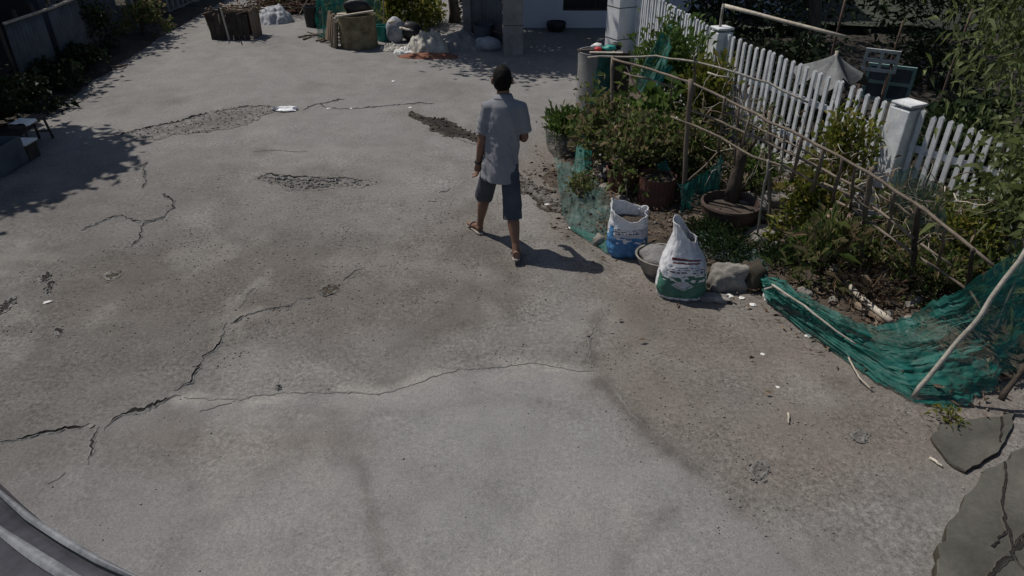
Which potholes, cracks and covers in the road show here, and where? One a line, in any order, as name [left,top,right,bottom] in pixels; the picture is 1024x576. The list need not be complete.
crack [587,310,602,364]
pothole [850,427,871,443]
pothole [133,107,276,140]
pothole [318,284,341,297]
pothole [408,111,478,143]
pothole [748,458,773,483]
pothole [254,174,383,191]
crack [82,162,176,250]
crack [302,99,434,111]
crack [0,288,315,465]
